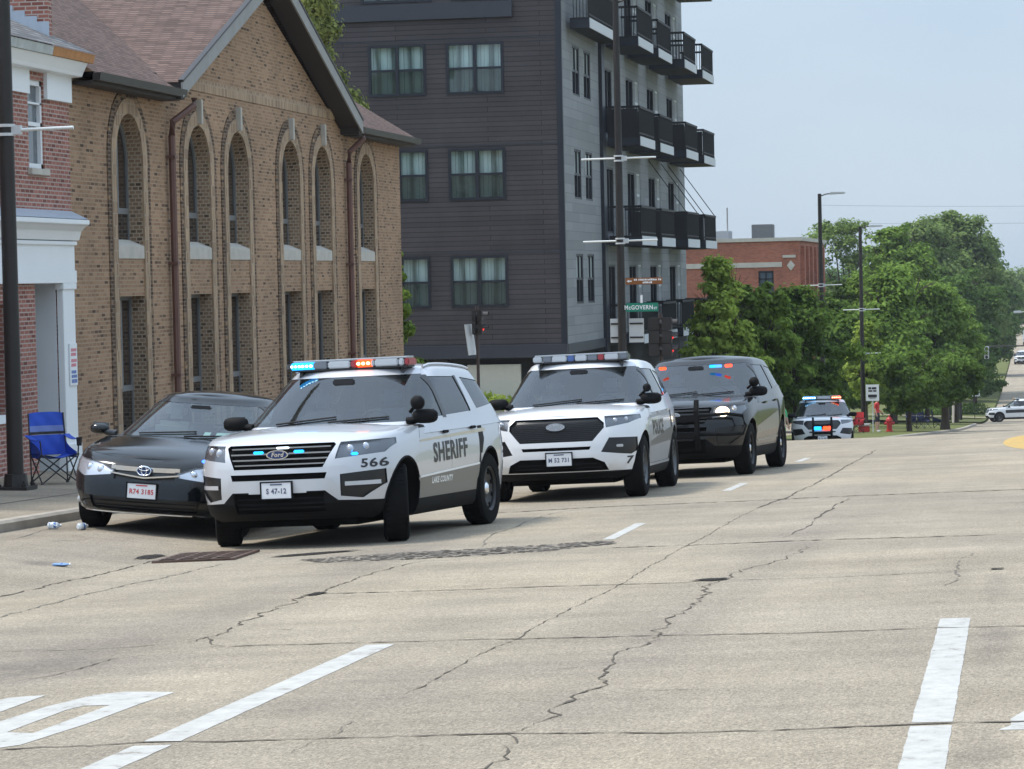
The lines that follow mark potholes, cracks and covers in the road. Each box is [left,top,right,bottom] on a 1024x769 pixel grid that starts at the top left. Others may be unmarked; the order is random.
crack [191,595,304,646]
crack [405,509,755,694]
crack [760,453,872,507]
crack [1,560,153,596]
crack [482,547,809,769]
drain grate [152,549,260,563]
